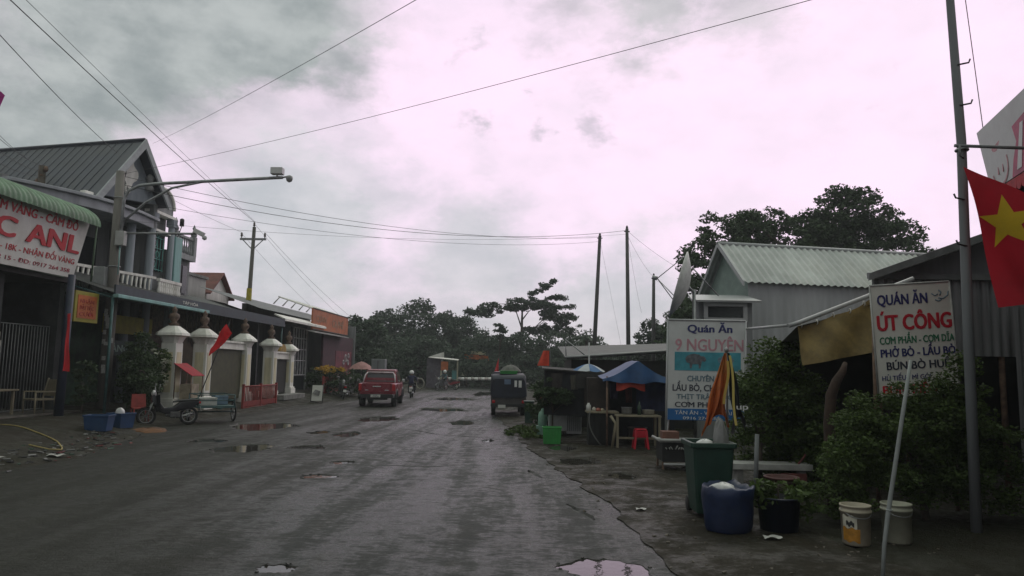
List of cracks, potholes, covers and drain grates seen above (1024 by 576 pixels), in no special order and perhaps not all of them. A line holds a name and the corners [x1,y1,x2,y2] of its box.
pothole [254,562,300,573]
pothole [230,422,299,431]
pothole [209,443,275,453]
pothole [608,472,637,480]
pothole [558,457,602,466]
pothole [554,557,652,576]
